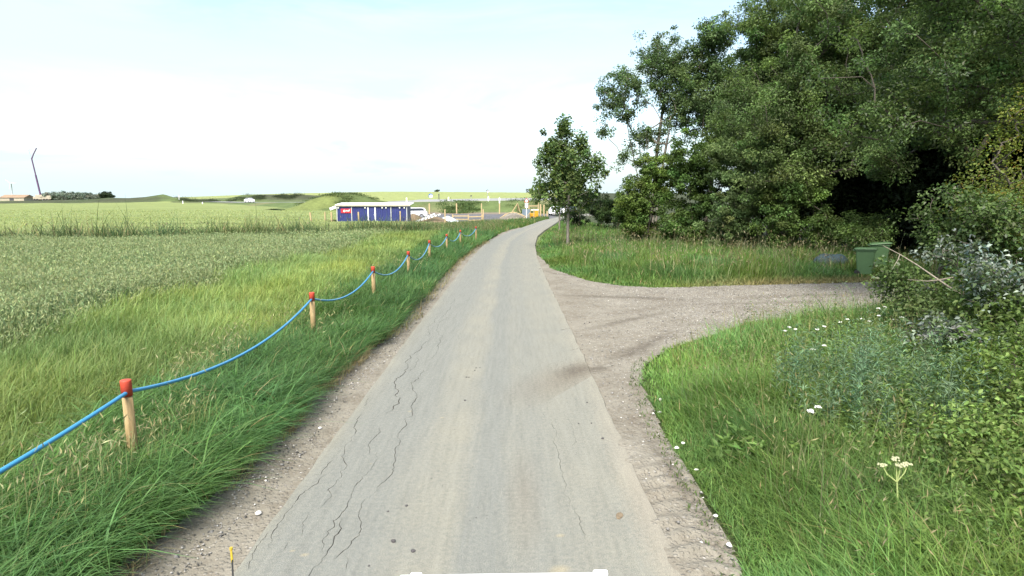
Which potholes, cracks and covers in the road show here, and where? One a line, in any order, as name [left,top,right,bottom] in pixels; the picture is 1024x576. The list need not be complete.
crack [249,317,447,575]
